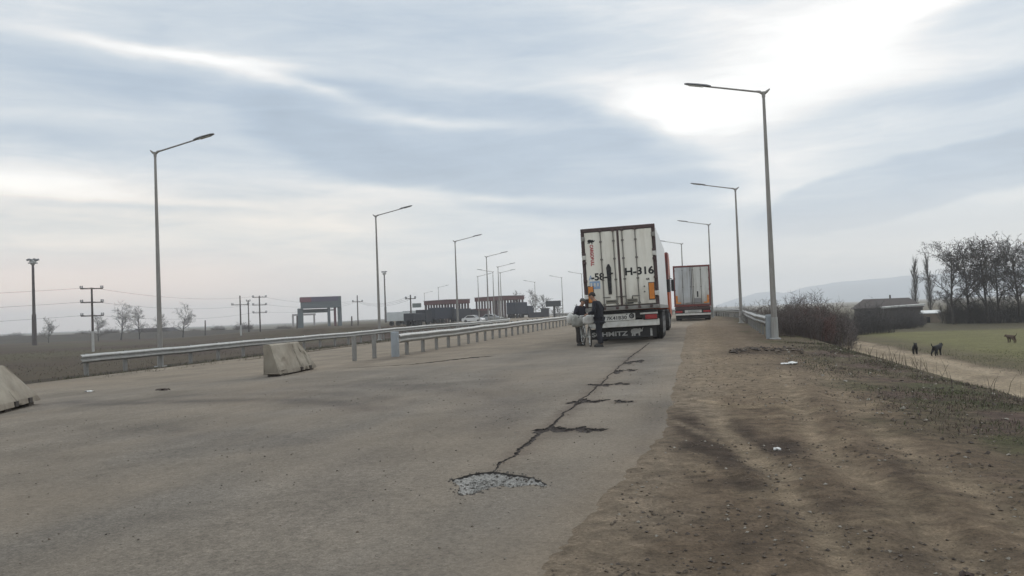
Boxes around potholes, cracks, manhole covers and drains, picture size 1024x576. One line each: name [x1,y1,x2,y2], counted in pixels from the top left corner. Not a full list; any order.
pothole [447,470,552,496]
crack [495,343,649,470]
